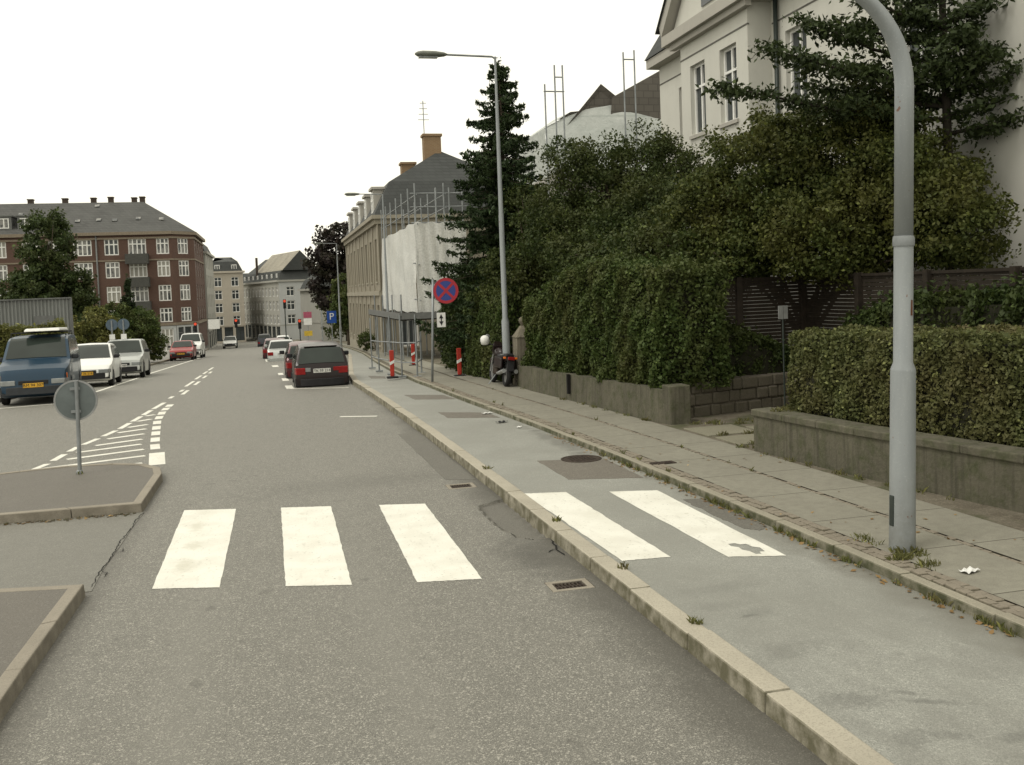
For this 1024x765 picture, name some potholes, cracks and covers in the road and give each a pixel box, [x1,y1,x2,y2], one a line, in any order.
manhole cover [561,455,602,463]
drain grate [445,482,477,490]
drain grate [545,578,595,592]
